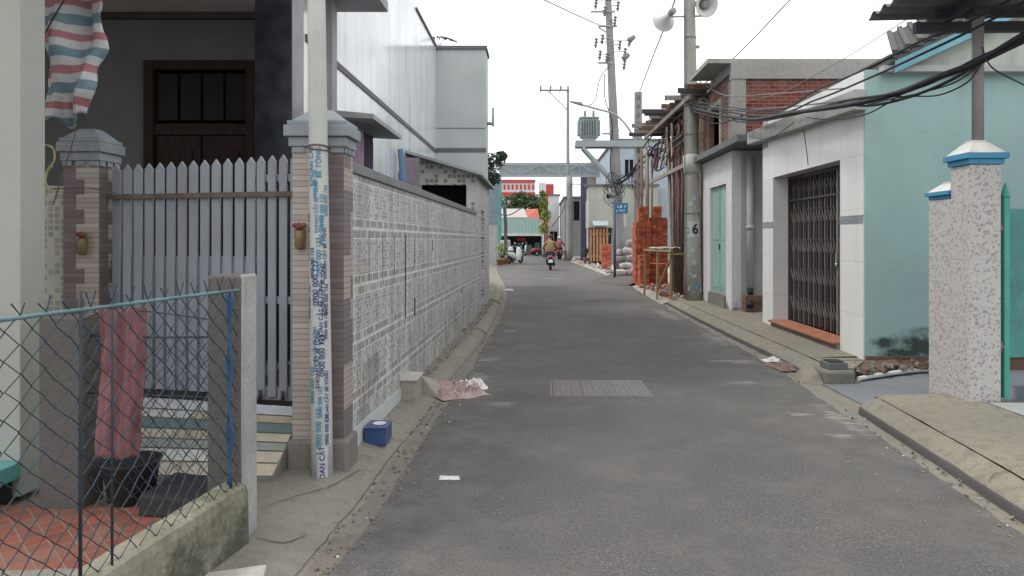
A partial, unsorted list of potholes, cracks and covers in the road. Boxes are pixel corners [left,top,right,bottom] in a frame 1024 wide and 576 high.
manhole cover [549,380,653,398]
